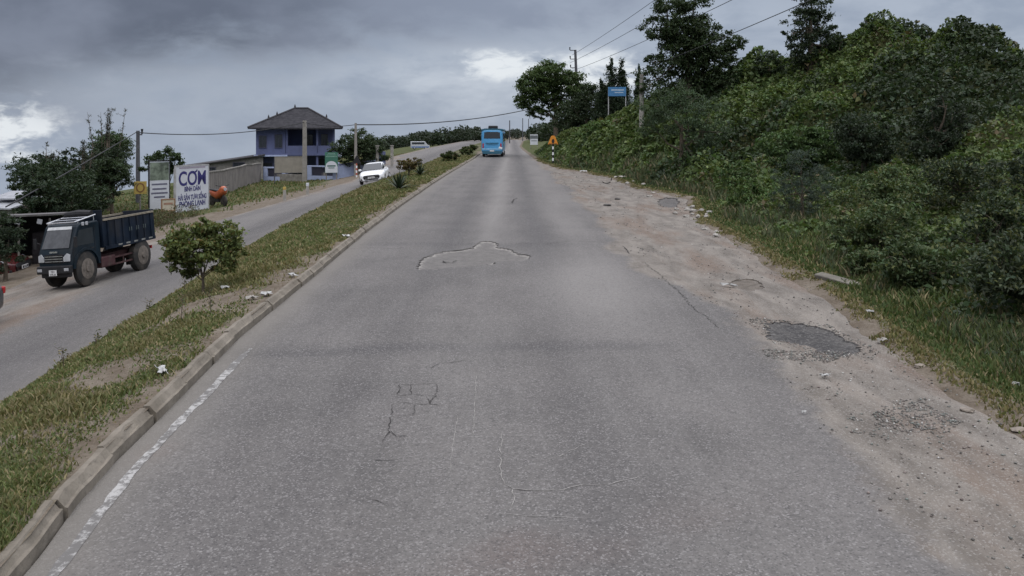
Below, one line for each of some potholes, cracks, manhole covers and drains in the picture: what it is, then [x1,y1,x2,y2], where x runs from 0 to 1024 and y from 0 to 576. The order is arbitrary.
crack [499,433,639,518]
crack [382,361,458,442]
